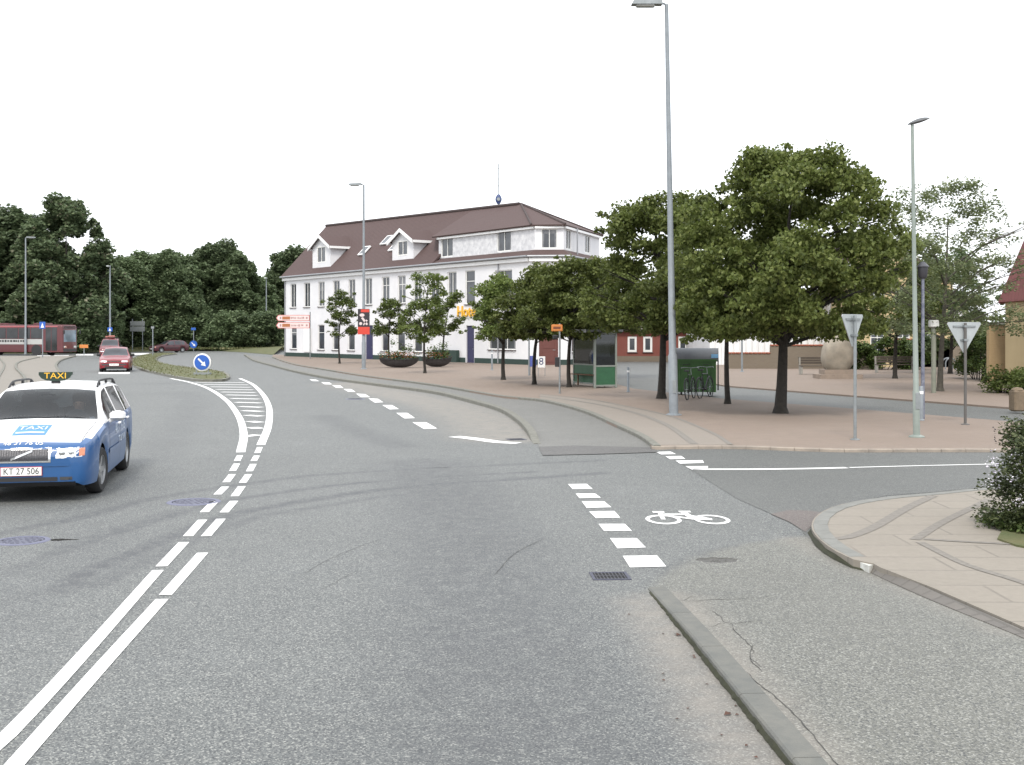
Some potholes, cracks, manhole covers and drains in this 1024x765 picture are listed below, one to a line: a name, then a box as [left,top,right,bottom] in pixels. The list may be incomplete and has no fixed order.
manhole cover [0,536,51,546]
drain grate [589,572,632,580]
manhole cover [166,498,221,506]
crack [681,595,838,765]
